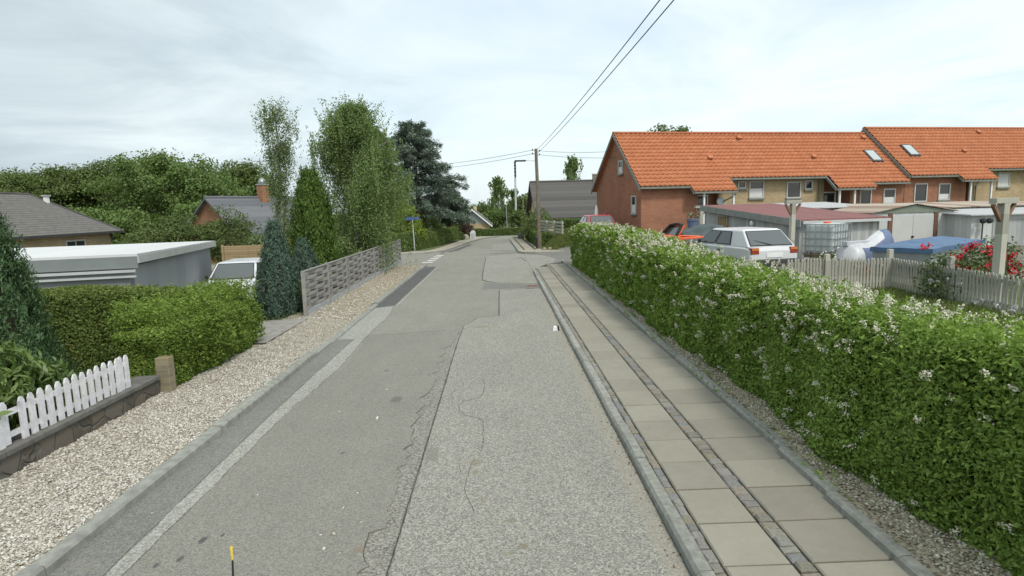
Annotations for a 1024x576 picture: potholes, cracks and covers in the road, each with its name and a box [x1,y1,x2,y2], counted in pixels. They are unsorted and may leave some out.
crack [452,384,485,550]
